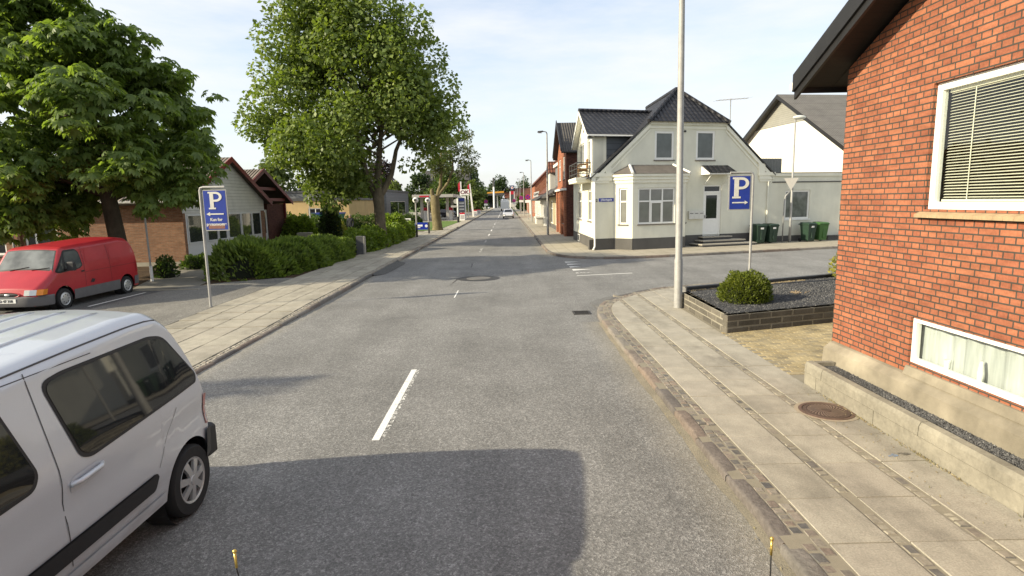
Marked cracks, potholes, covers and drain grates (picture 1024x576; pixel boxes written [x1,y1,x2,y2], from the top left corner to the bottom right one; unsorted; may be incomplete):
manhole cover [794,401,860,422]
